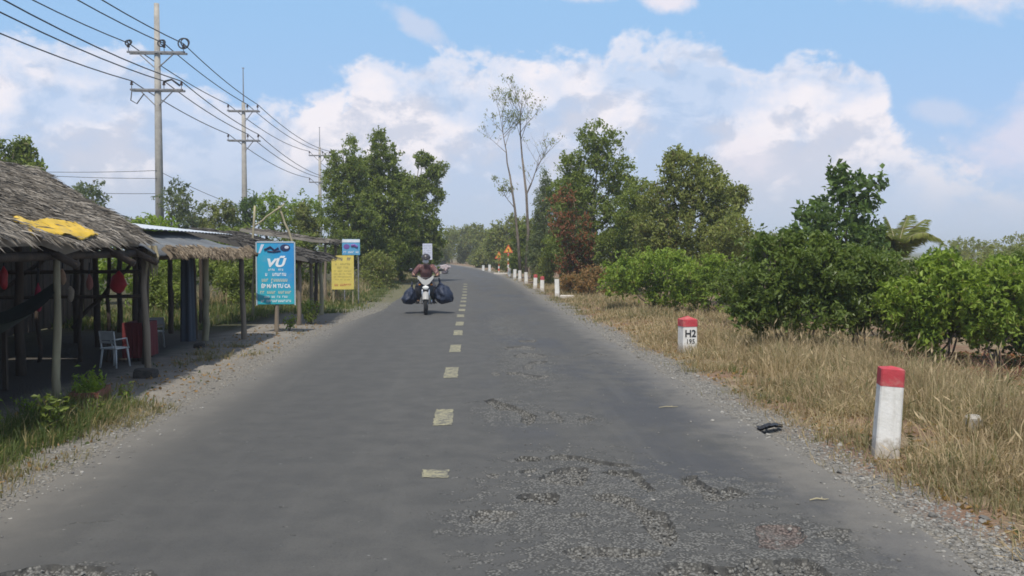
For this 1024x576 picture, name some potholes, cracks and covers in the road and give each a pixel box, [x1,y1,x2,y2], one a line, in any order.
pothole [484,399,537,426]
pothole [547,411,595,423]
pothole [468,510,520,524]
pothole [514,454,679,560]
pothole [0,564,108,576]
